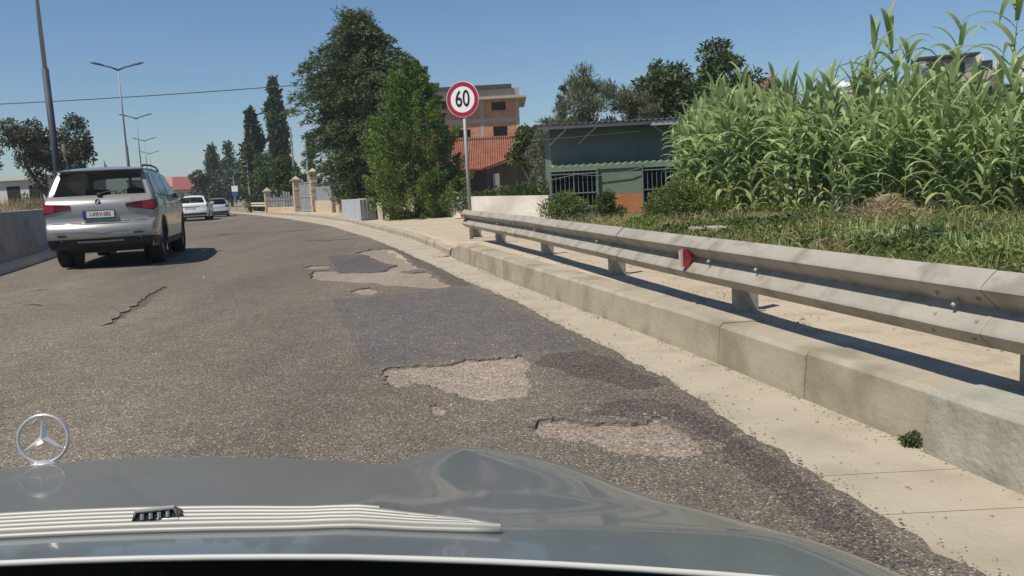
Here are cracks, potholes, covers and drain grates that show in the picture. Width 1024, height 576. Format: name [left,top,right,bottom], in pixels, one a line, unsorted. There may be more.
pothole [380,355,535,402]
pothole [429,403,448,415]
pothole [351,287,379,295]
pothole [308,249,453,289]
pothole [528,416,713,458]
crack [102,286,167,326]
